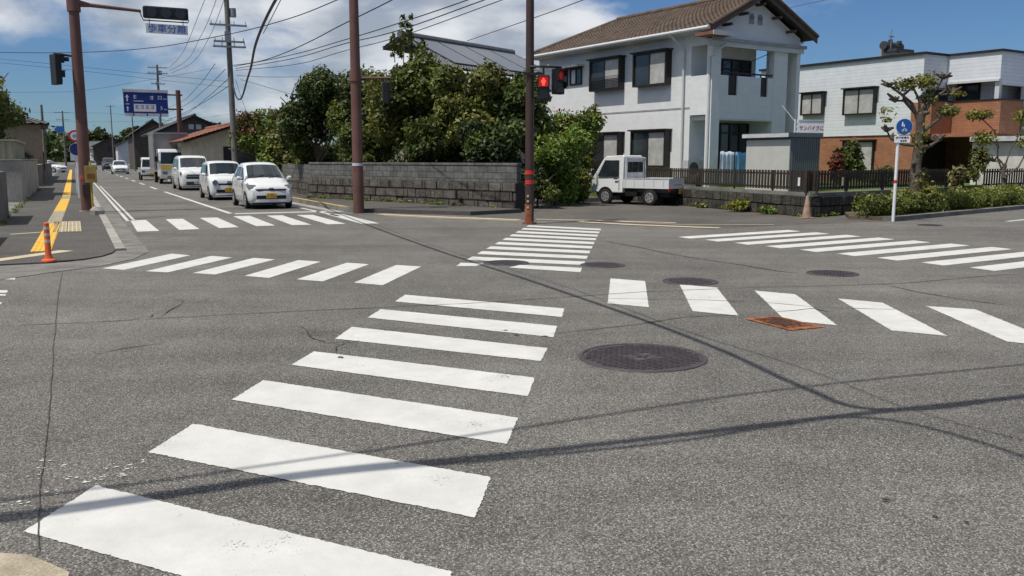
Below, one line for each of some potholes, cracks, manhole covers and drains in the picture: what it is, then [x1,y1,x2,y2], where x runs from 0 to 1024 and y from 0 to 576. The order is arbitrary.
manhole cover [662,277,719,285]
manhole cover [746,315,823,330]
manhole cover [578,343,708,372]
